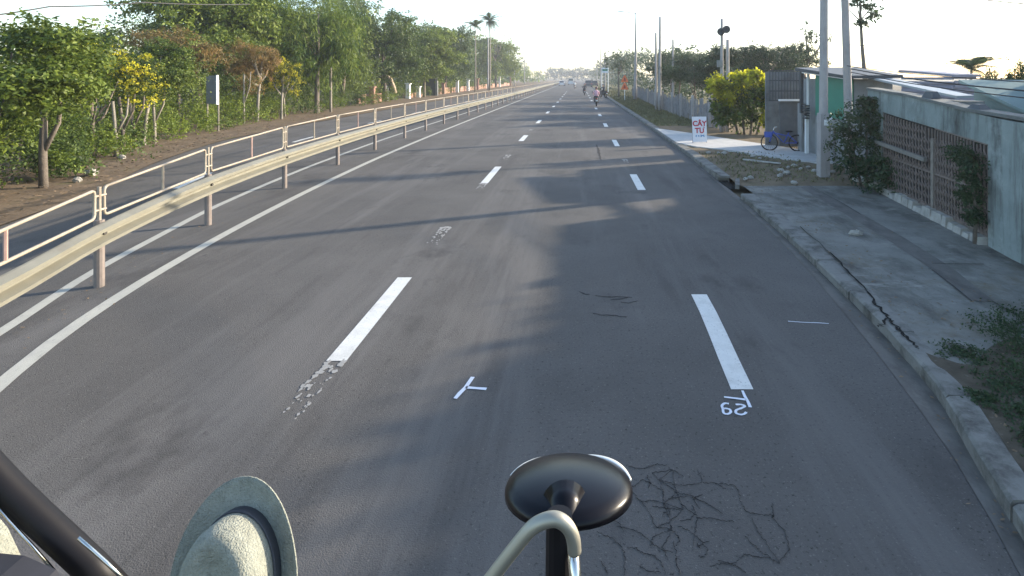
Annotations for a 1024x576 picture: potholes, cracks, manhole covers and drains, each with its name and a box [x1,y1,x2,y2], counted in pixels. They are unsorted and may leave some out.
crack [597,463,790,575]
crack [581,292,636,317]
crack [800,226,919,348]
